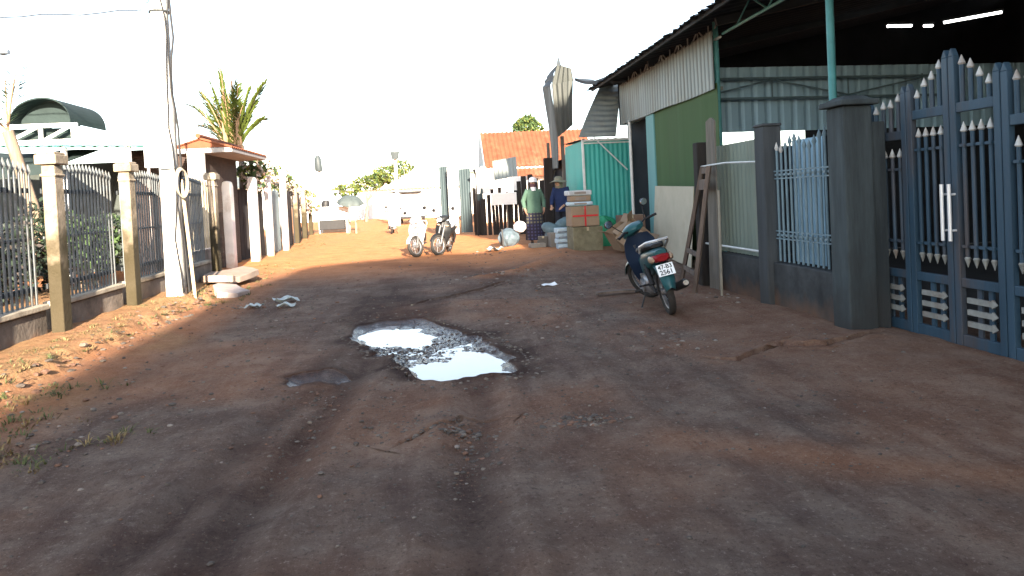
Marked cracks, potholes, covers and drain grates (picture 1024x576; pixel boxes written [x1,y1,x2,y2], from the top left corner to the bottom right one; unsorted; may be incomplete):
pothole [343,316,528,384]
crack [686,327,905,365]
pothole [271,365,364,391]
